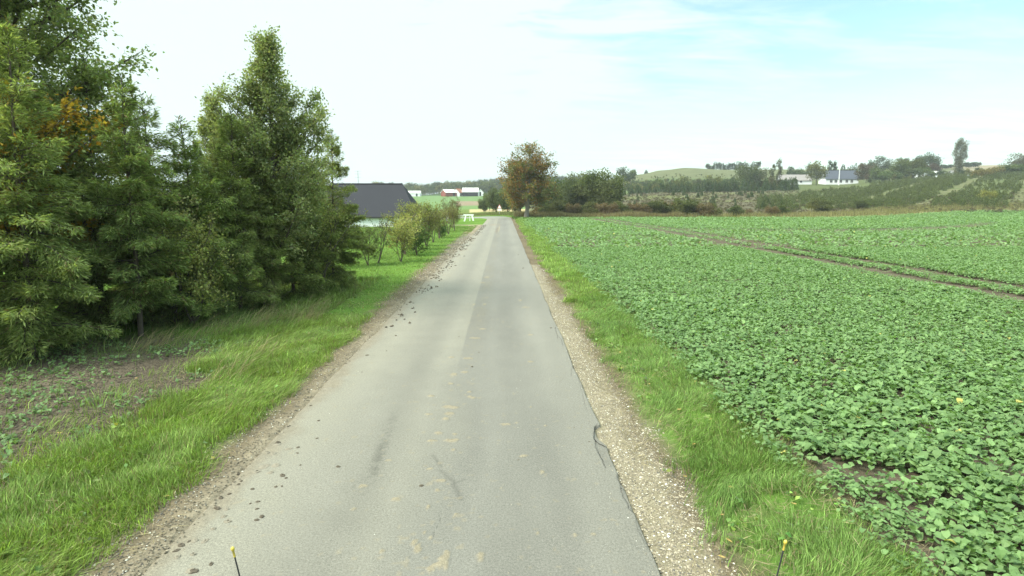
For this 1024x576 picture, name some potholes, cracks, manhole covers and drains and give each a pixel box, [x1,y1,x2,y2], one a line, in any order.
crack [571,367,650,552]
